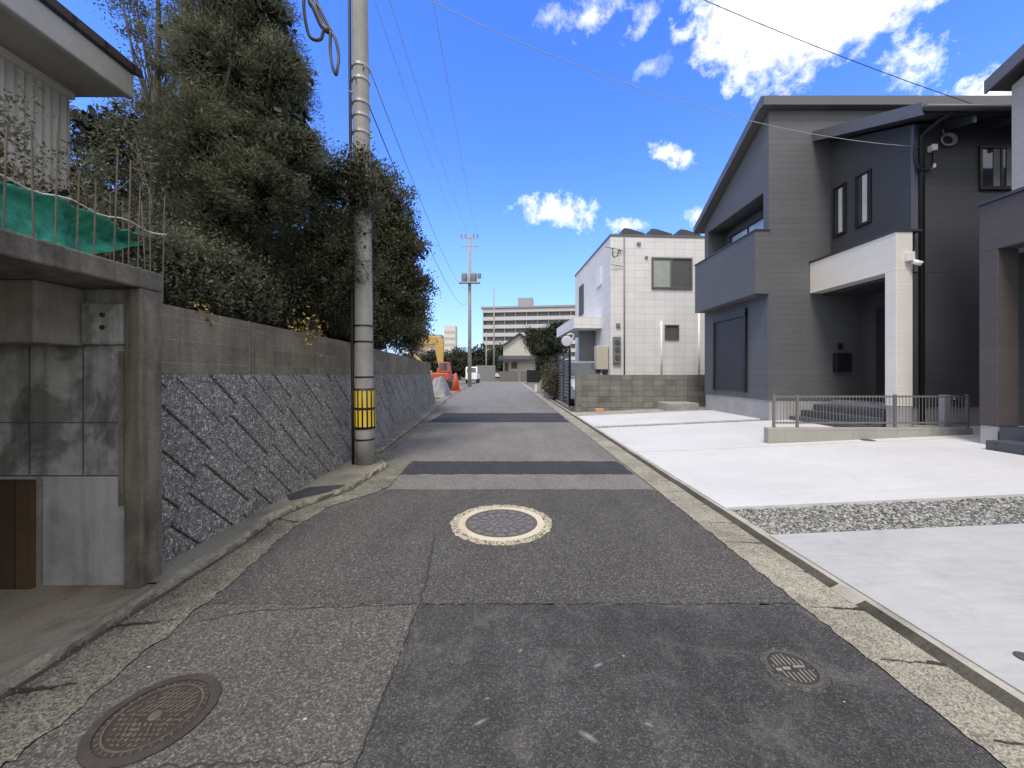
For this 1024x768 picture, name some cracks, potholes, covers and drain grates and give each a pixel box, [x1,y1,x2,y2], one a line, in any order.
crack [354,534,792,768]
crack [112,617,181,627]
crack [9,681,98,695]
manhole cover [449,504,552,546]
manhole cover [76,673,221,768]
